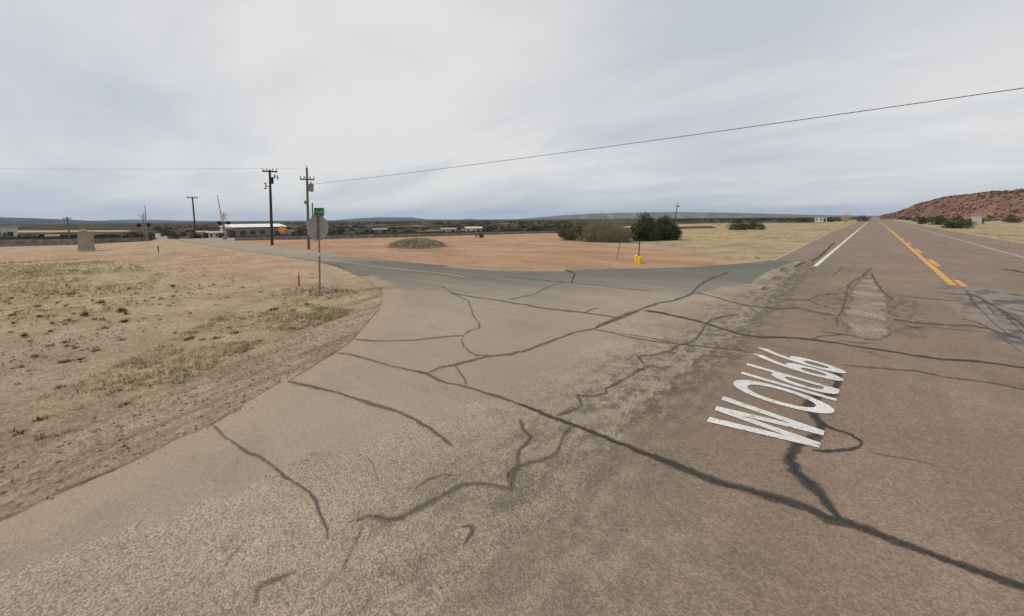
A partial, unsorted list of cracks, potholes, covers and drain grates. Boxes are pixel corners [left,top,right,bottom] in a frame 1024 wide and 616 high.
crack [793,243,1024,354]
crack [212,405,328,537]
crack [343,269,754,566]
crack [252,569,296,607]
